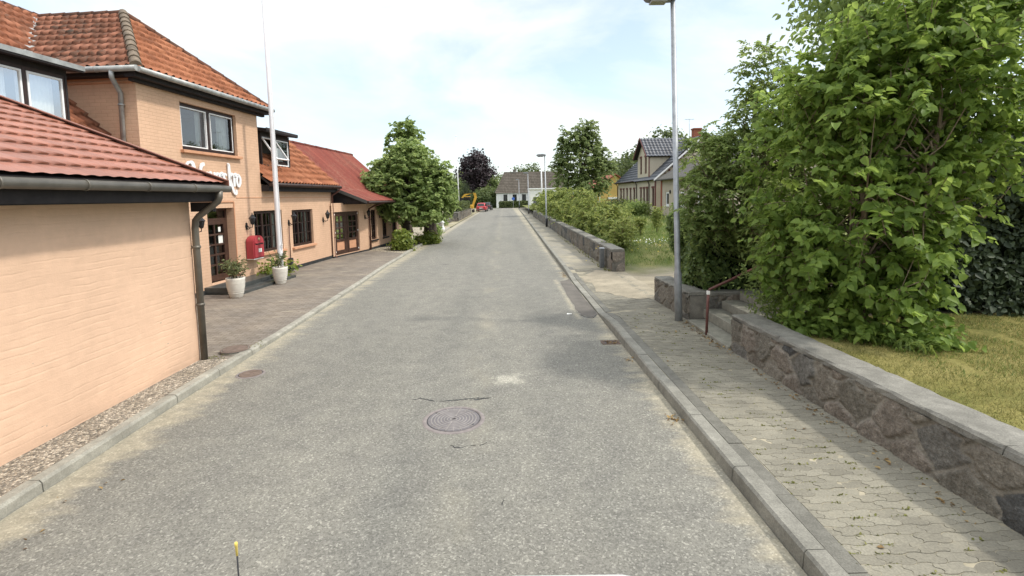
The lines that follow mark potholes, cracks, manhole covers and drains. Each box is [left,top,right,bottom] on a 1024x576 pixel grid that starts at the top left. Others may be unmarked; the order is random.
manhole cover [422,406,485,434]
manhole cover [220,345,251,355]
